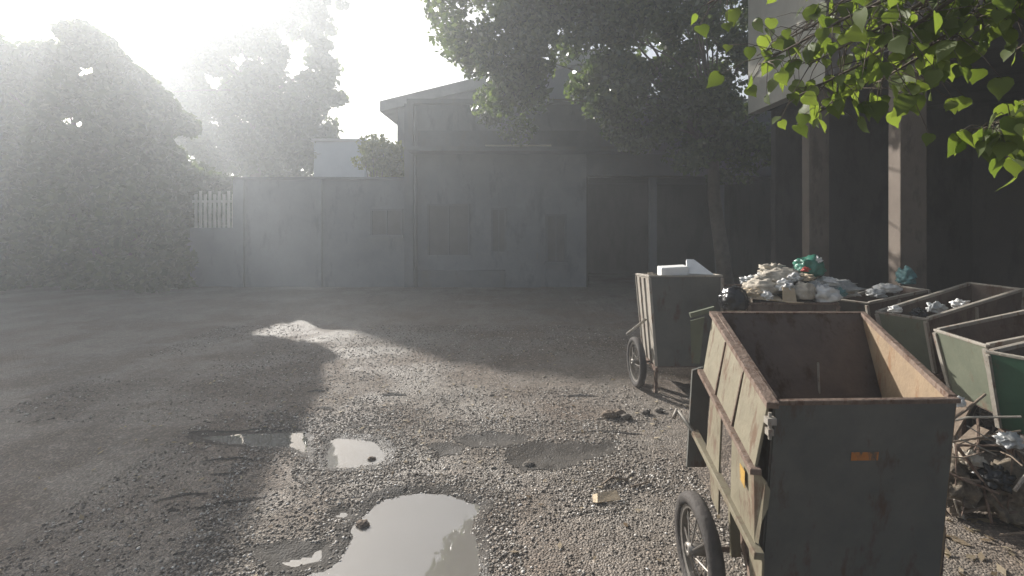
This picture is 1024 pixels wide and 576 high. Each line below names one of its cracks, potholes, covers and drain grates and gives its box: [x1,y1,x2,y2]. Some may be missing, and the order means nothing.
pothole [308,433,397,472]
pothole [184,428,316,463]
pothole [451,432,531,448]
pothole [505,438,621,471]
pothole [269,485,493,576]
pothole [244,539,341,574]
